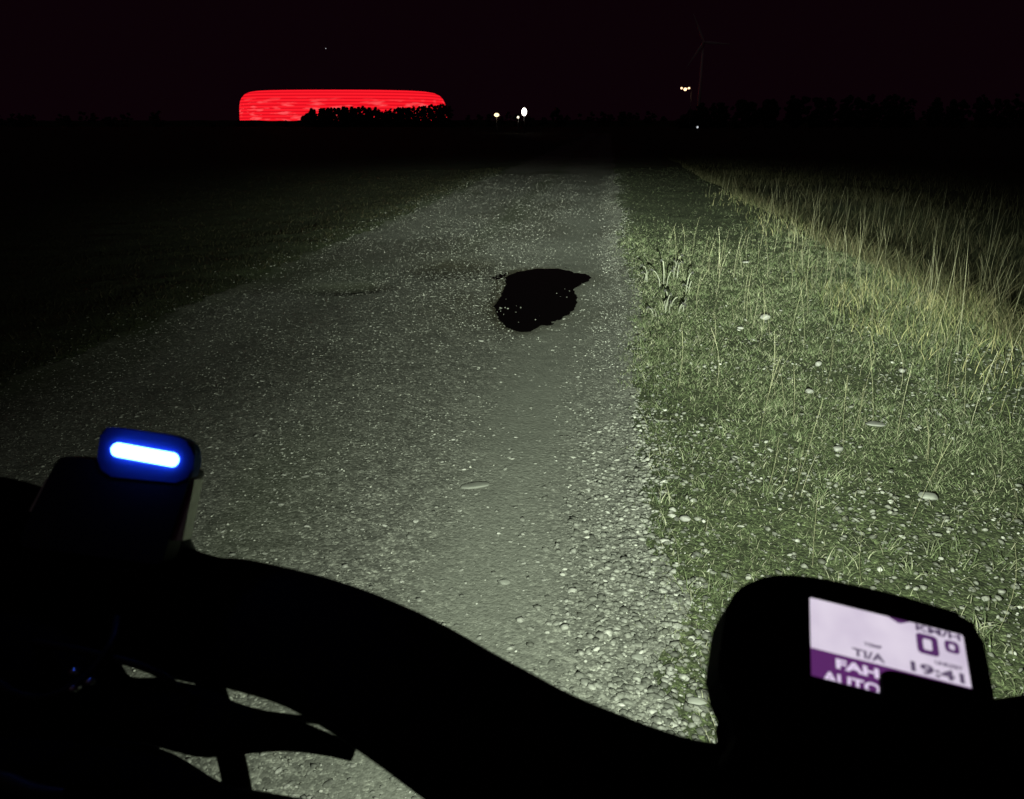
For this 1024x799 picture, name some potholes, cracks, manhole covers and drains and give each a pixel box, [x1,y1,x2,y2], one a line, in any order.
pothole [479,266,604,336]
